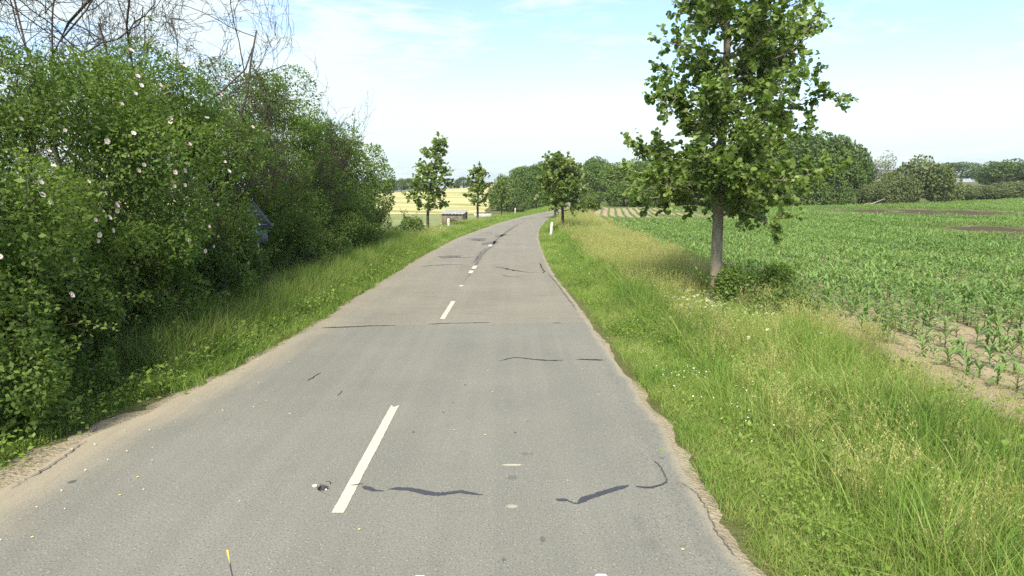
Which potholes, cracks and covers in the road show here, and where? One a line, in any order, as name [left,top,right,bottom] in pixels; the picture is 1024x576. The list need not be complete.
crack [683,483,737,556]
crack [421,213,575,308]
